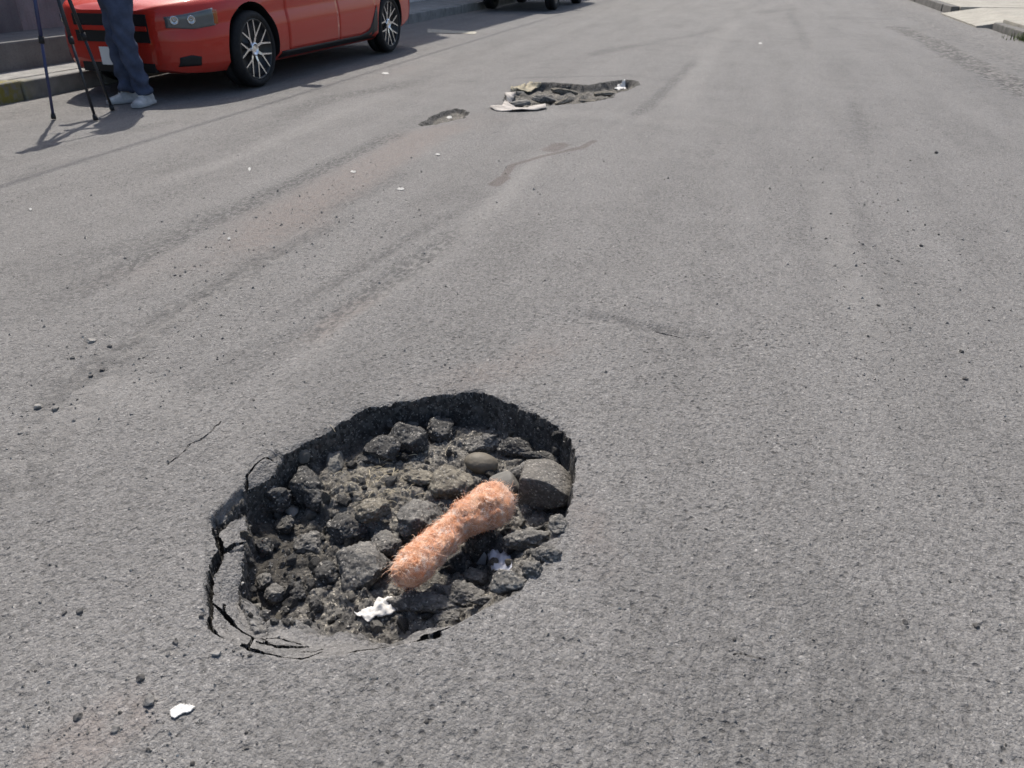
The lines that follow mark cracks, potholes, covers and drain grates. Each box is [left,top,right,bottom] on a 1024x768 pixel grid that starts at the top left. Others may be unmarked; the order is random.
pothole [216,392,577,647]
crack [204,457,450,660]
pothole [503,80,640,108]
pothole [418,109,470,126]
crack [167,421,222,465]
